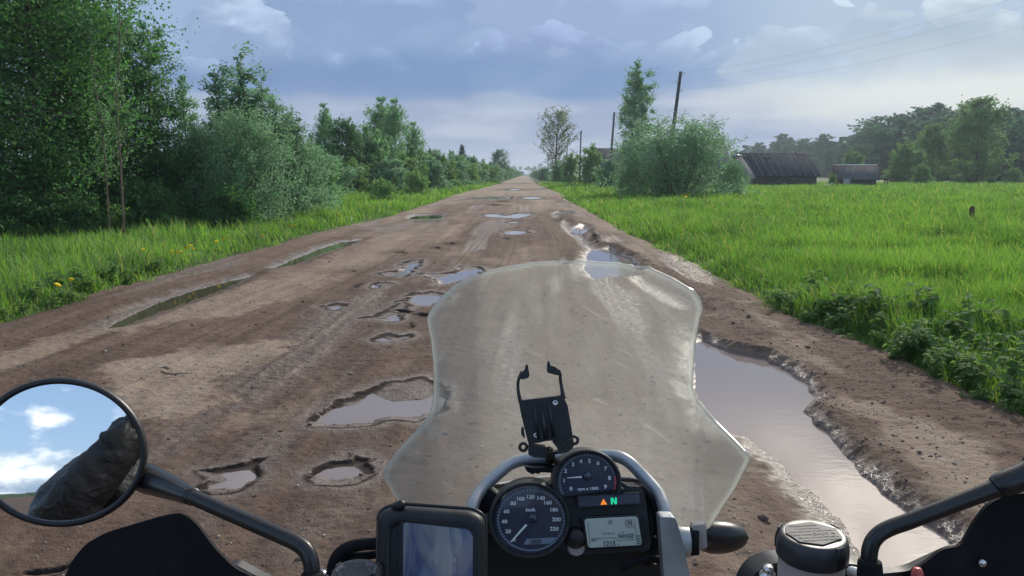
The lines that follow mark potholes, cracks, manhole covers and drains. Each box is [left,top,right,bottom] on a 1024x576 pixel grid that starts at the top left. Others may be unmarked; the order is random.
pothole [310,377,448,427]
pothole [360,300,411,323]
pothole [378,260,423,277]
pothole [373,333,412,342]
pothole [419,266,486,285]
pothole [196,458,263,495]
pothole [308,454,374,486]
pothole [404,291,453,306]
